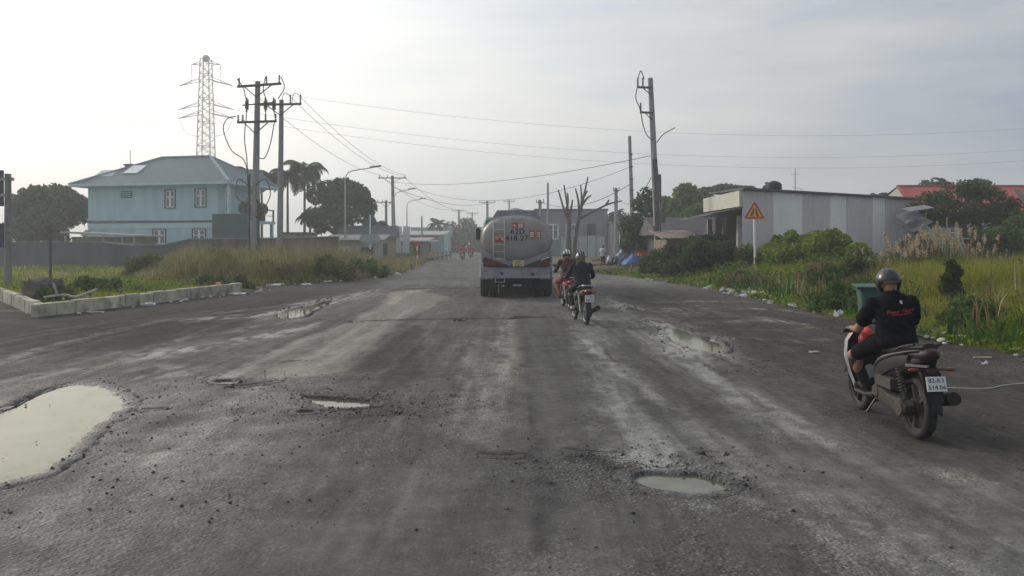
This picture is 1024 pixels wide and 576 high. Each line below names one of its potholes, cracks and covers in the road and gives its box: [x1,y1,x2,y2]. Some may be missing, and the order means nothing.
pothole [277,299,331,319]
pothole [612,466,747,499]
pothole [0,381,143,491]
pothole [656,326,733,355]
pothole [294,393,393,410]
